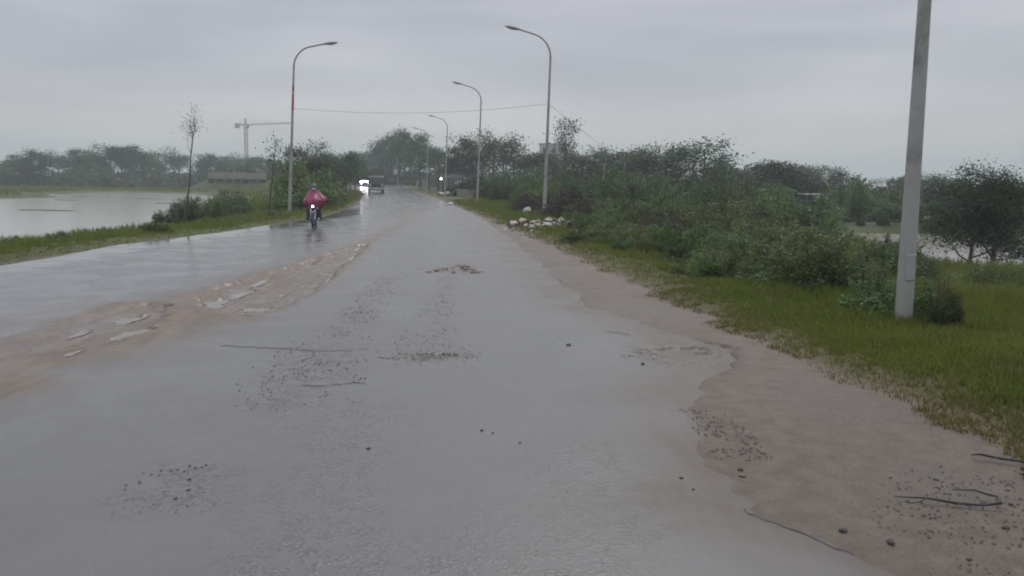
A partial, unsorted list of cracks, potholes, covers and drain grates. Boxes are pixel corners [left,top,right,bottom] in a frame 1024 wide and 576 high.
pothole [622,342,730,371]
pothole [422,263,495,275]
pothole [382,349,481,366]
crack [221,345,352,360]
